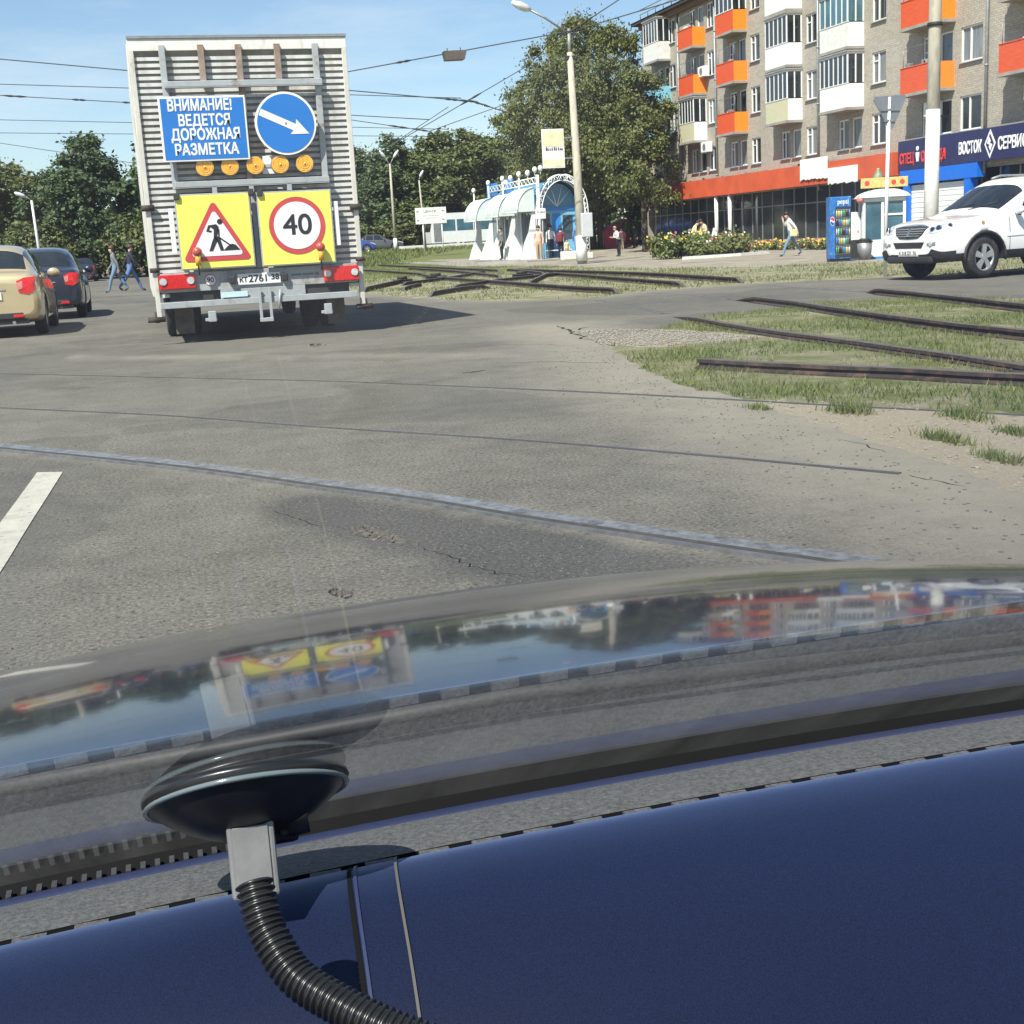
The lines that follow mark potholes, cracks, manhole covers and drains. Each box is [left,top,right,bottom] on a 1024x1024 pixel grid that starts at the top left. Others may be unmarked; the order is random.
crack [418,546,549,579]
pothole [350,525,406,544]
crack [505,326,597,363]
pothole [328,587,354,599]
